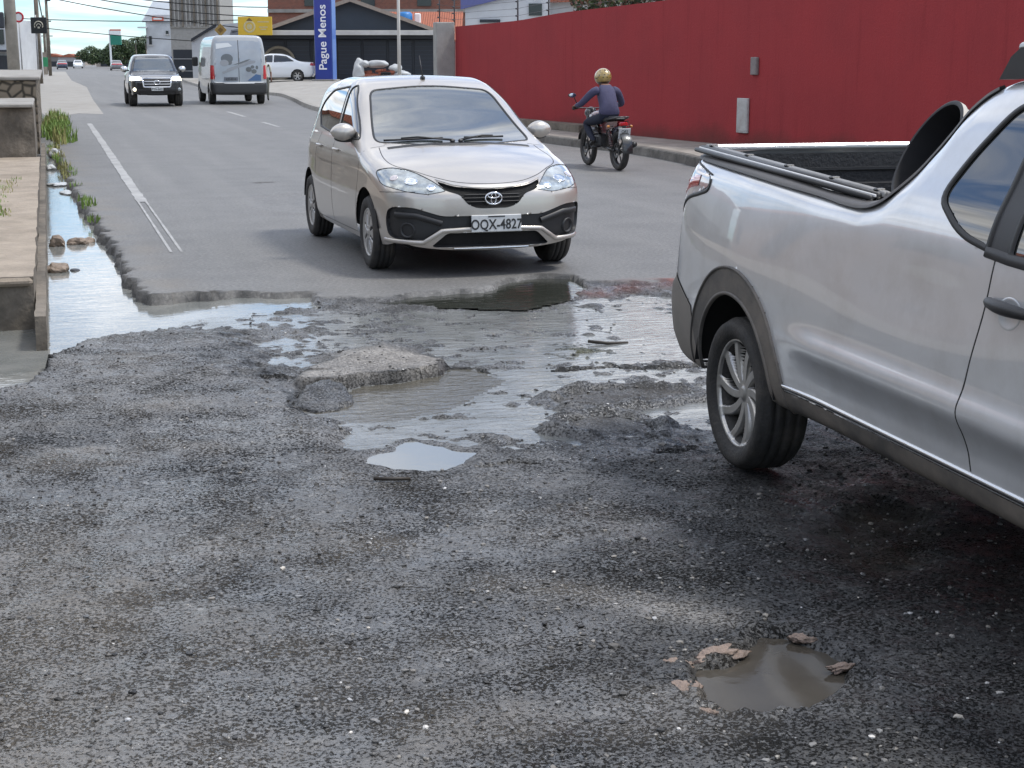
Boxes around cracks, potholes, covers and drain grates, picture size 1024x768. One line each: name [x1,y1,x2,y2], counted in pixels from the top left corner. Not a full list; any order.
pothole [663,630,859,714]
pothole [382,276,588,312]
pothole [555,384,691,406]
pothole [293,367,506,423]
pothole [569,412,659,437]
pothole [362,441,476,471]
